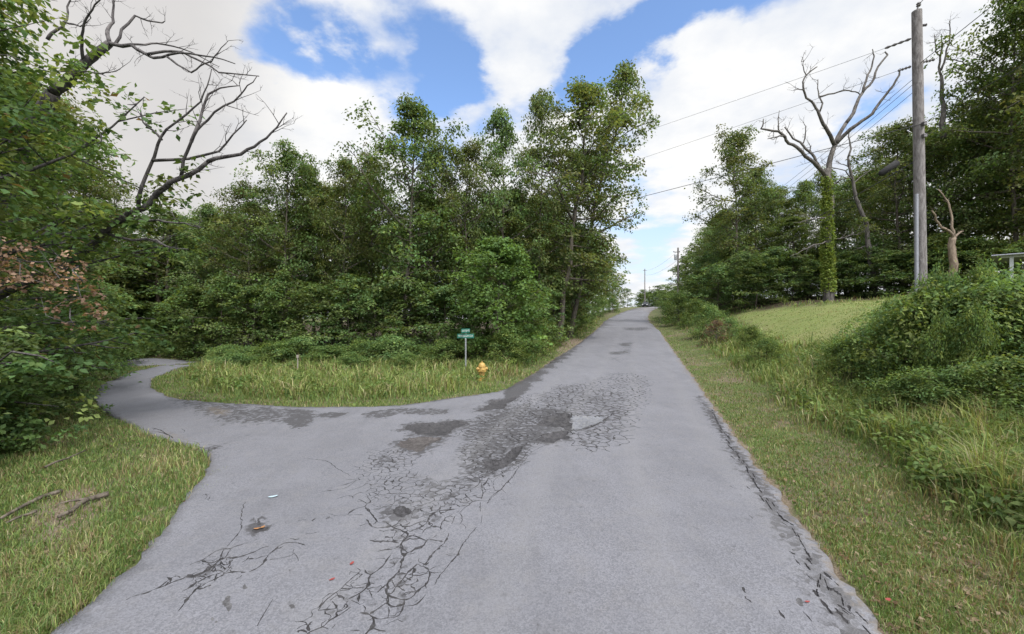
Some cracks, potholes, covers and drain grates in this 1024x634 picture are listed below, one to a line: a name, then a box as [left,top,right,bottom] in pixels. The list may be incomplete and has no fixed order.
crack [528,373,655,453]
pothole [535,430,570,443]
crack [126,503,330,626]
crack [711,410,871,634]
pothole [483,446,523,472]
pothole [537,413,574,431]
pothole [393,506,412,517]
crack [295,395,545,634]
